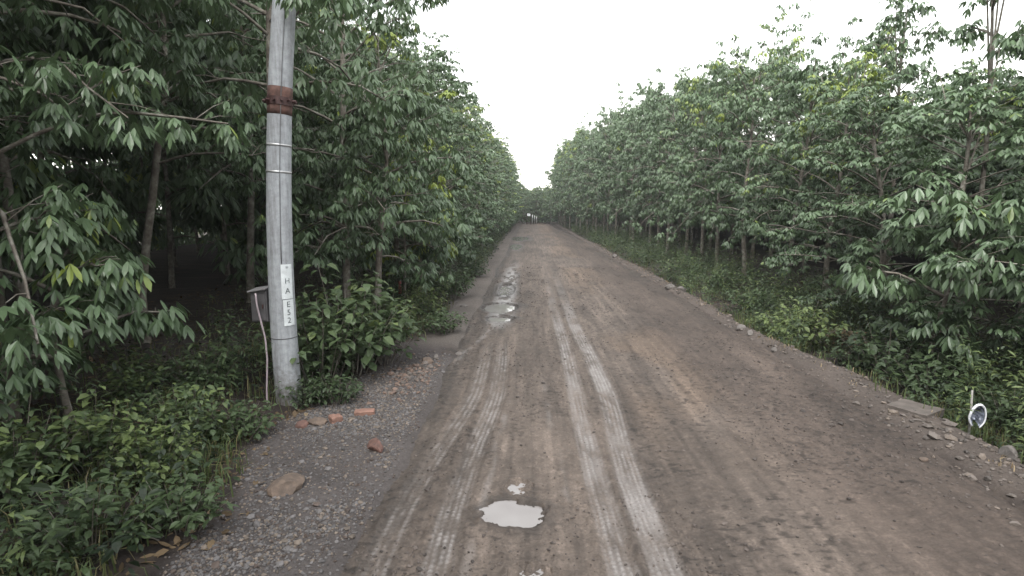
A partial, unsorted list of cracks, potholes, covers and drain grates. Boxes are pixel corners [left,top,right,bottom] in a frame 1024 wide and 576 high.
pothole [481,314,520,324]
pothole [477,301,525,317]
pothole [490,282,519,300]
pothole [468,494,559,534]
